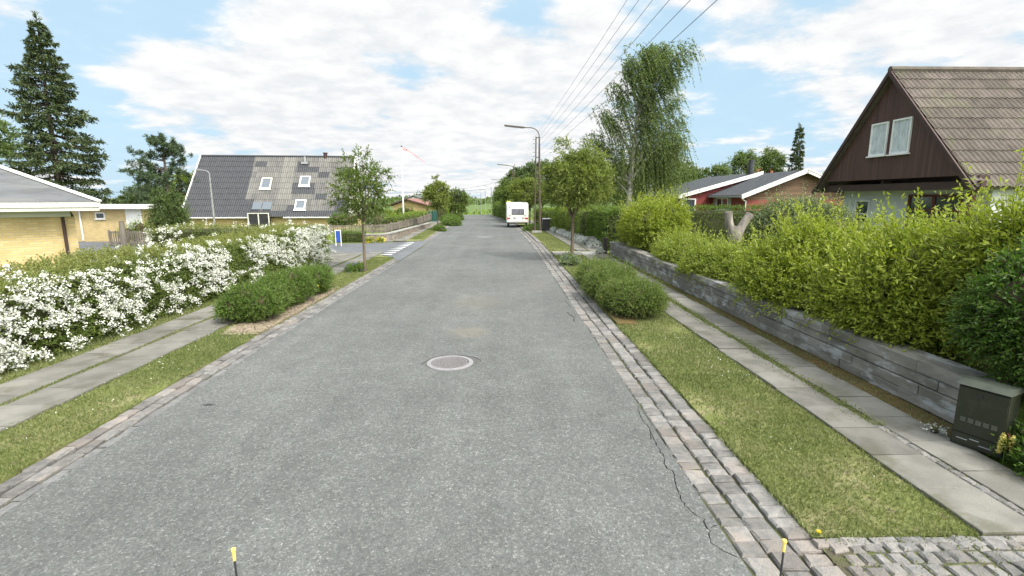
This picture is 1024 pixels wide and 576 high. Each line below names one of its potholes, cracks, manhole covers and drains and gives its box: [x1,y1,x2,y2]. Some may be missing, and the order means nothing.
crack [637,405,737,557]
manhole cover [421,355,481,371]
